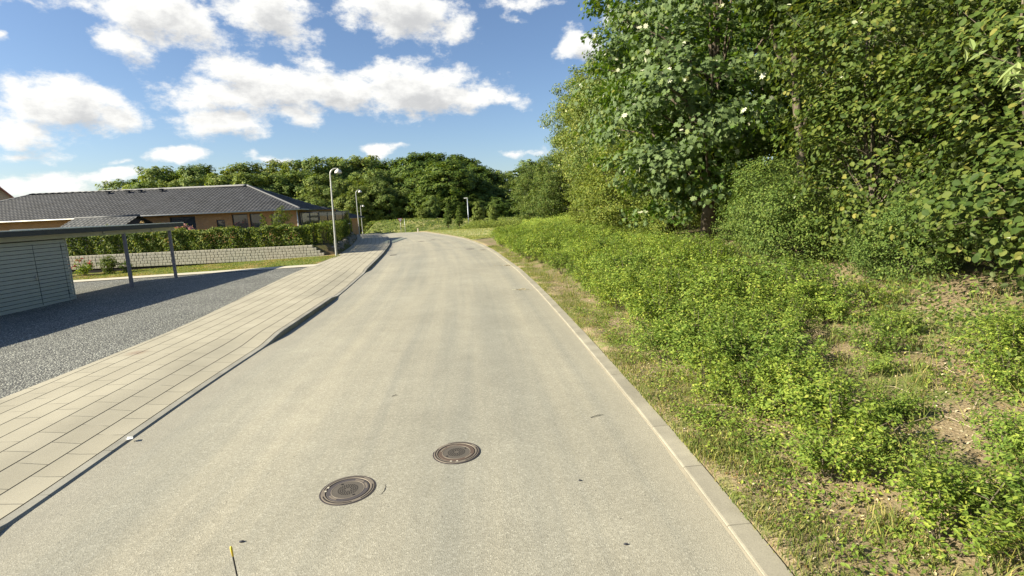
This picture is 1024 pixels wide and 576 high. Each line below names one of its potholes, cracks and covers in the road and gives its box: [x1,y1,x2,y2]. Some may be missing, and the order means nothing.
manhole cover [319,476,376,506]
manhole cover [433,442,480,464]
